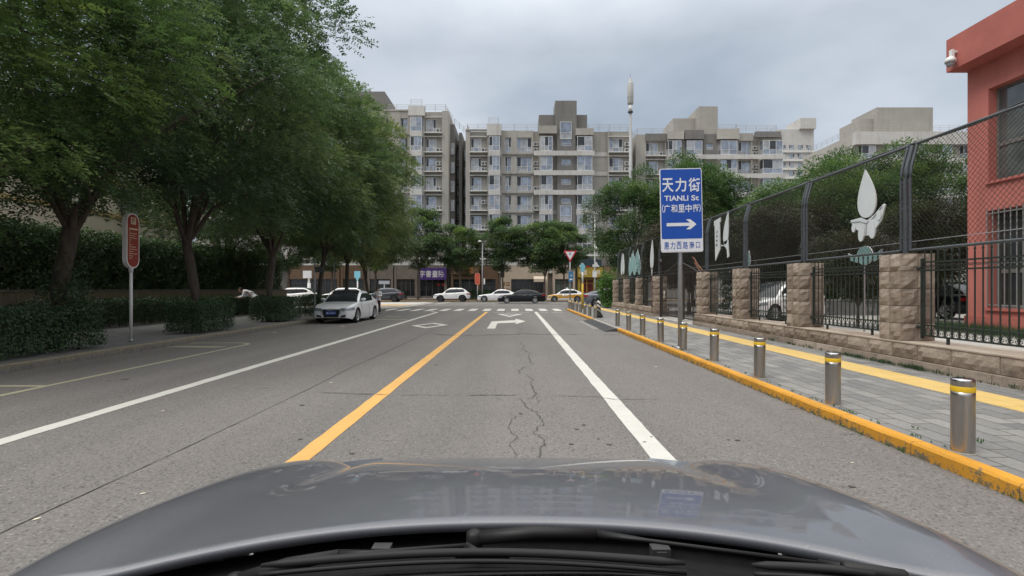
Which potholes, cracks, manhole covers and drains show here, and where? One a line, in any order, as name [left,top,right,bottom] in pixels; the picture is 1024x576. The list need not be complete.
crack [480,328,546,458]
